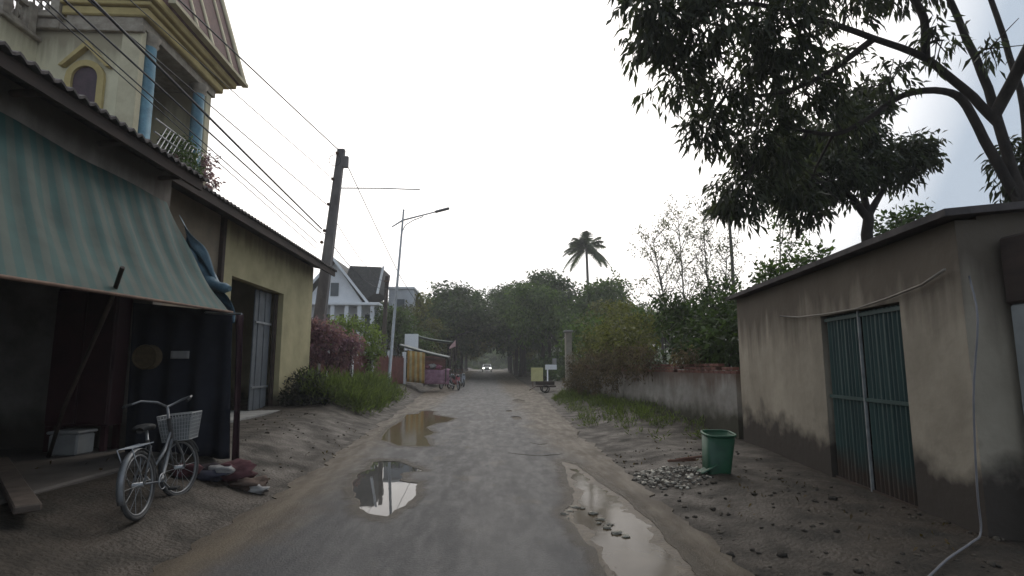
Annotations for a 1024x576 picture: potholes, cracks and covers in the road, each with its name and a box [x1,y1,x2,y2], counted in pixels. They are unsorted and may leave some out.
pothole [345,459,429,521]
pothole [555,460,708,576]
pothole [377,410,457,447]
